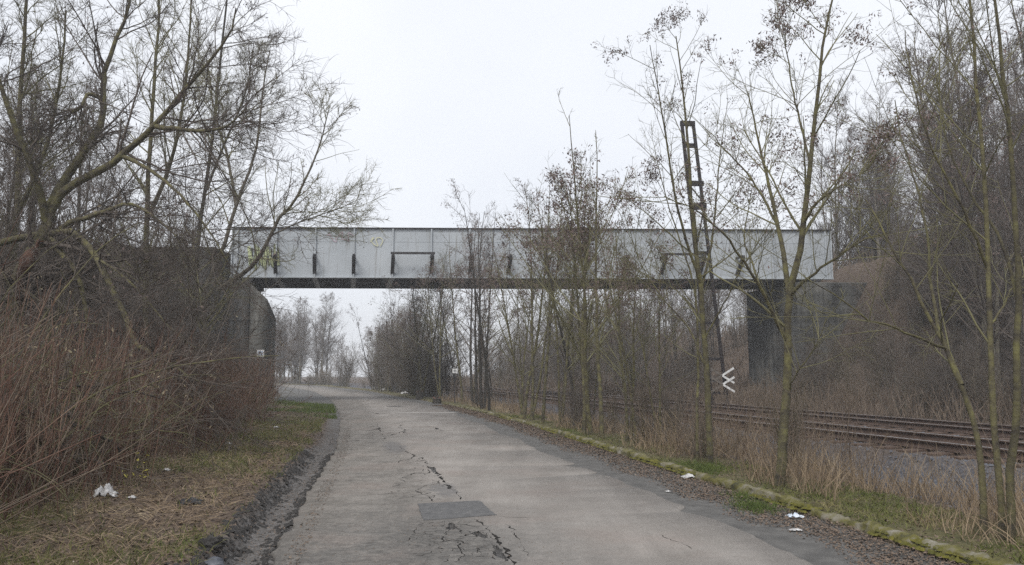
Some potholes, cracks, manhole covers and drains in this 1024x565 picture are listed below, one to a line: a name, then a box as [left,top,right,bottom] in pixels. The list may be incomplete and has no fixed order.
crack [407,516,528,565]
crack [354,412,462,502]
